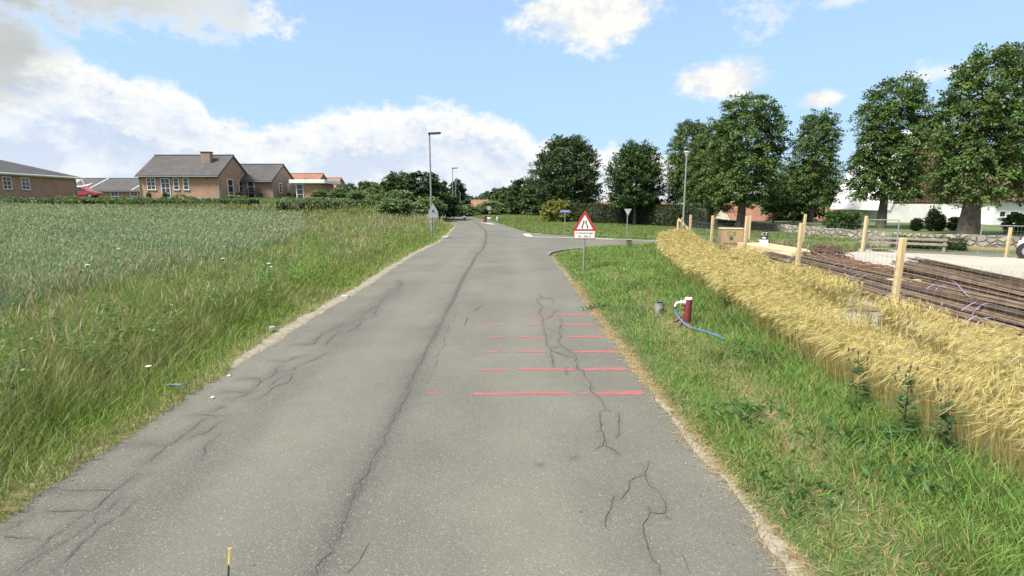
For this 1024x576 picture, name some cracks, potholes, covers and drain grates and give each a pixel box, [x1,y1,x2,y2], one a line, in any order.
crack [605,461,670,571]
crack [537,295,621,456]
crack [2,285,401,572]
